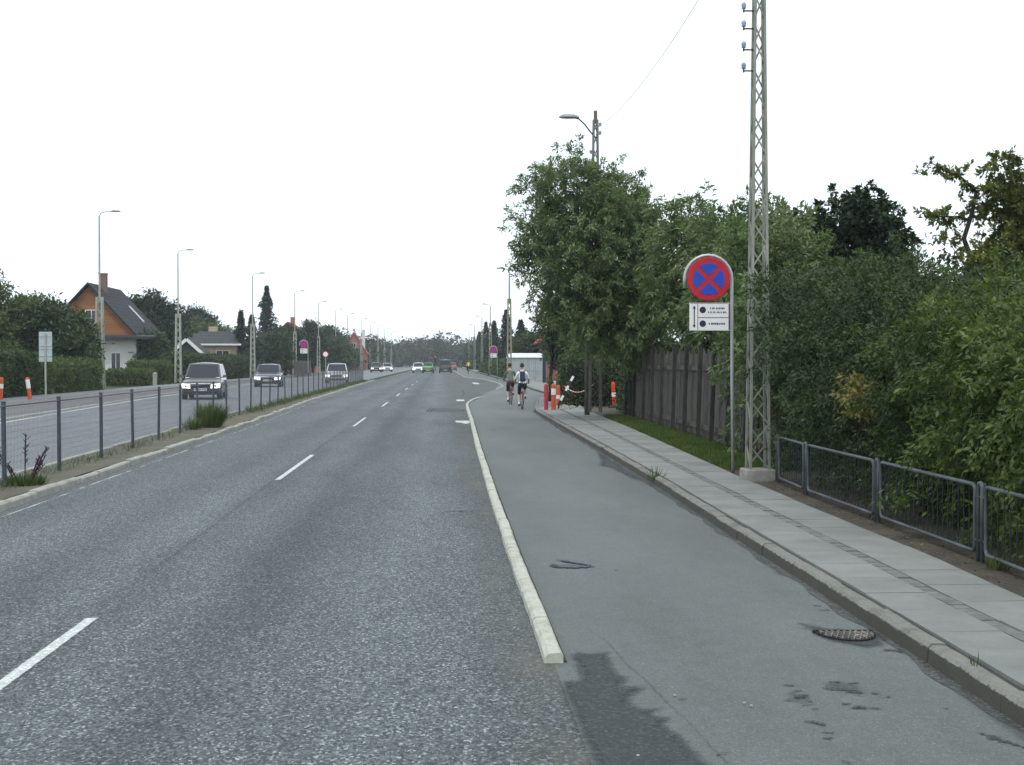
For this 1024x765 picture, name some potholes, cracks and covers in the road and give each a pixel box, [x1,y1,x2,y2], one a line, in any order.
drain grate [812,630,876,641]
